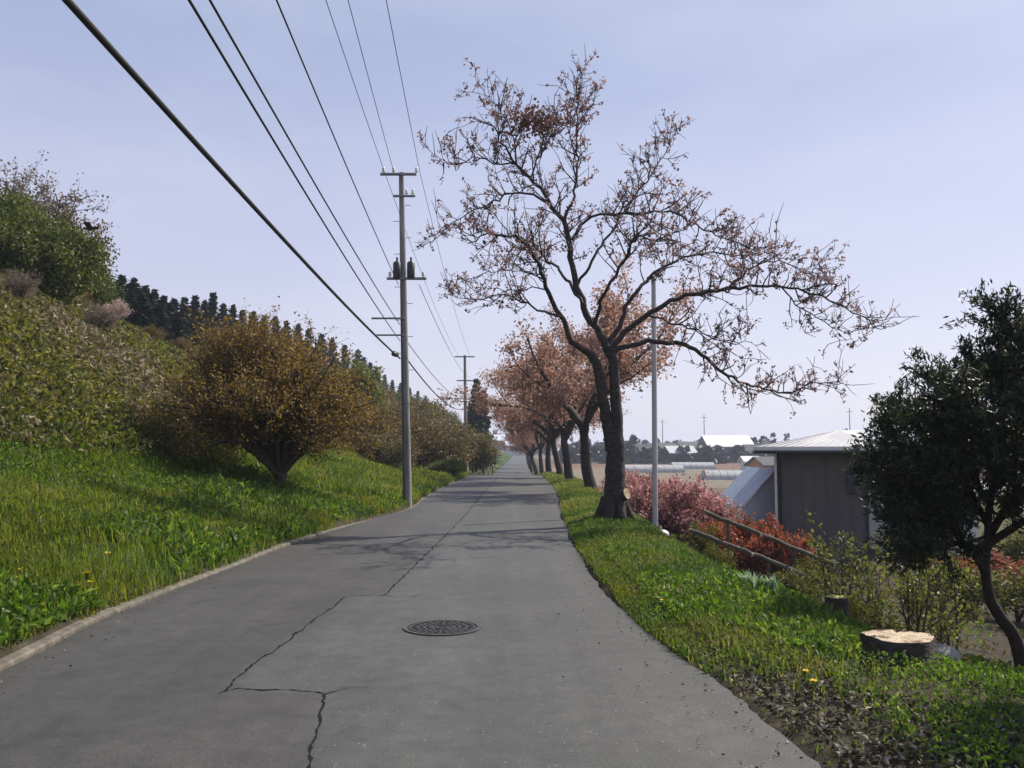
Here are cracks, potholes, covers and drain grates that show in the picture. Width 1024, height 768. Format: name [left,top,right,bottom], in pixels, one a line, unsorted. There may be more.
manhole cover [403,619,481,636]
crack [217,478,497,768]
